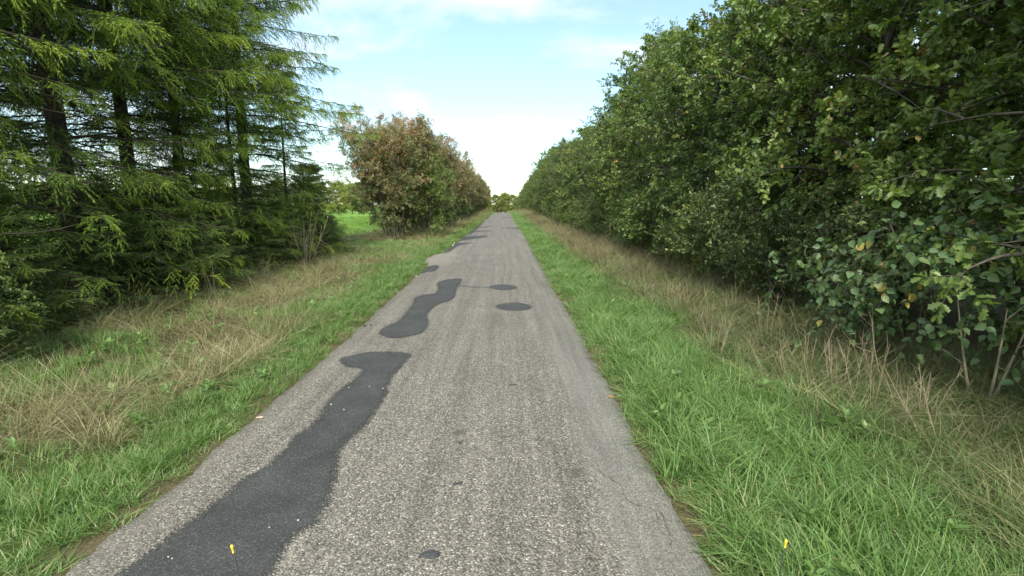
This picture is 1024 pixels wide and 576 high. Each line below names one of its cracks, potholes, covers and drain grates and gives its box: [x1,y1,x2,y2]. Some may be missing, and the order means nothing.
crack [600,471,672,548]
